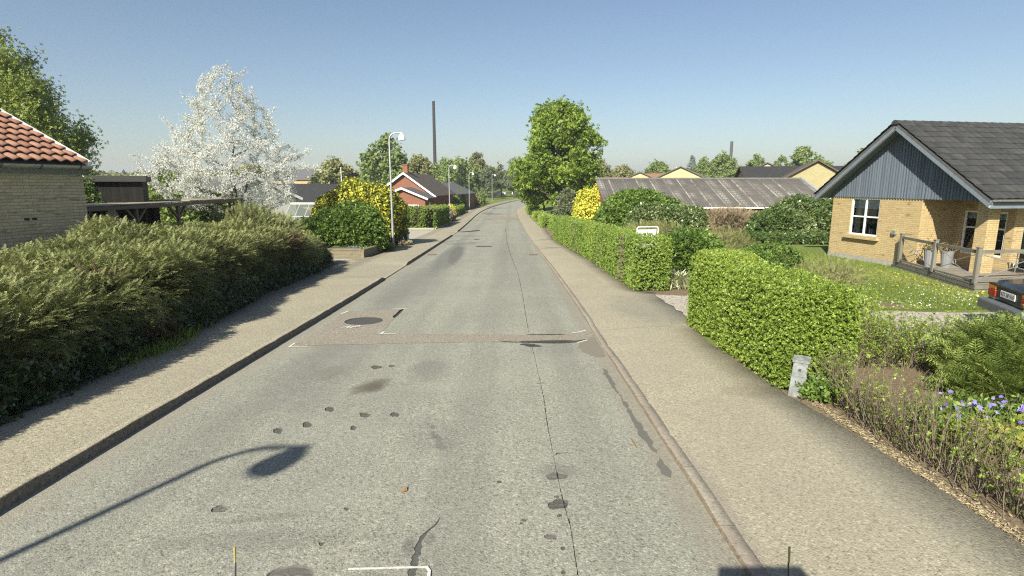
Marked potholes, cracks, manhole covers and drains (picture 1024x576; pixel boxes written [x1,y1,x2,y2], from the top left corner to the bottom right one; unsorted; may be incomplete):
manhole cover [344,317,383,325]
crack [532,348,579,576]
